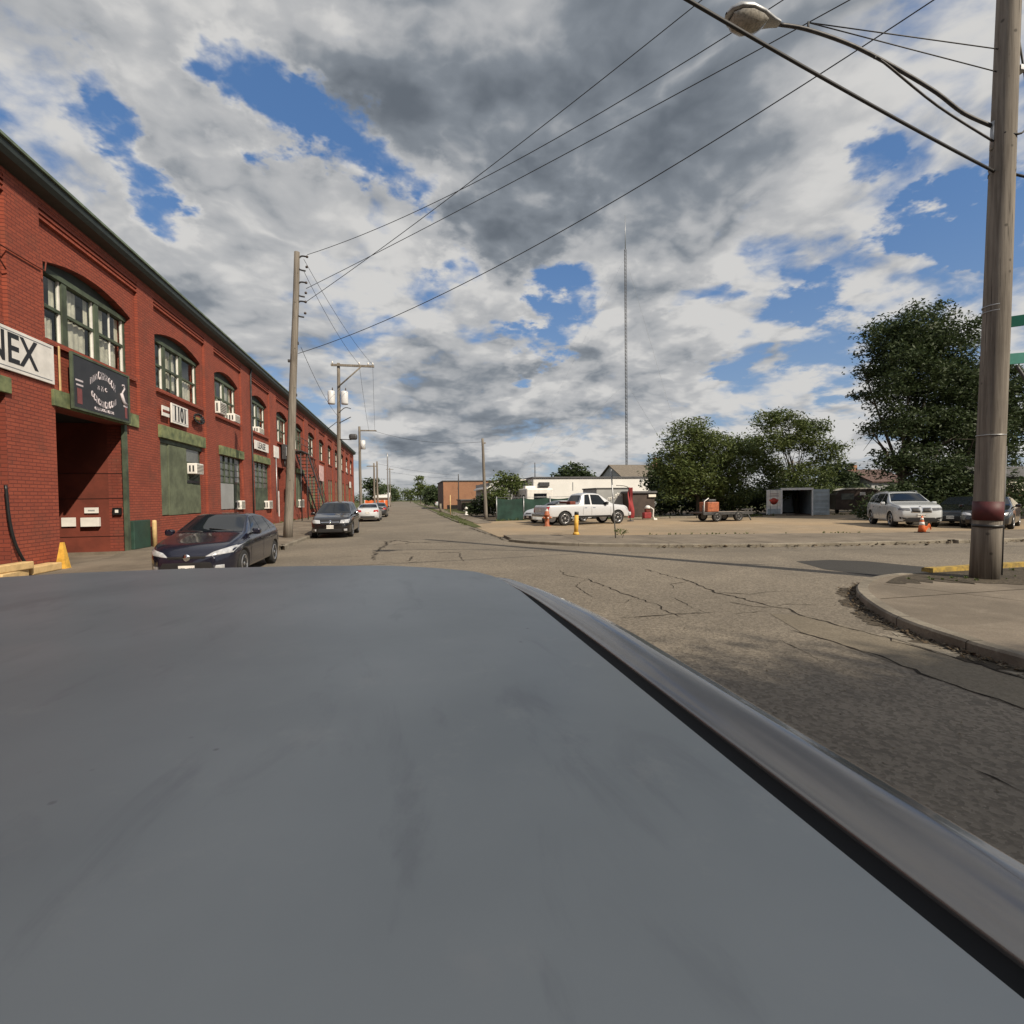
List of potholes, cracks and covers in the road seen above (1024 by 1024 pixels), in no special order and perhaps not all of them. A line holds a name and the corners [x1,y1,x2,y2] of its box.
crack [562,569,1024,679]
